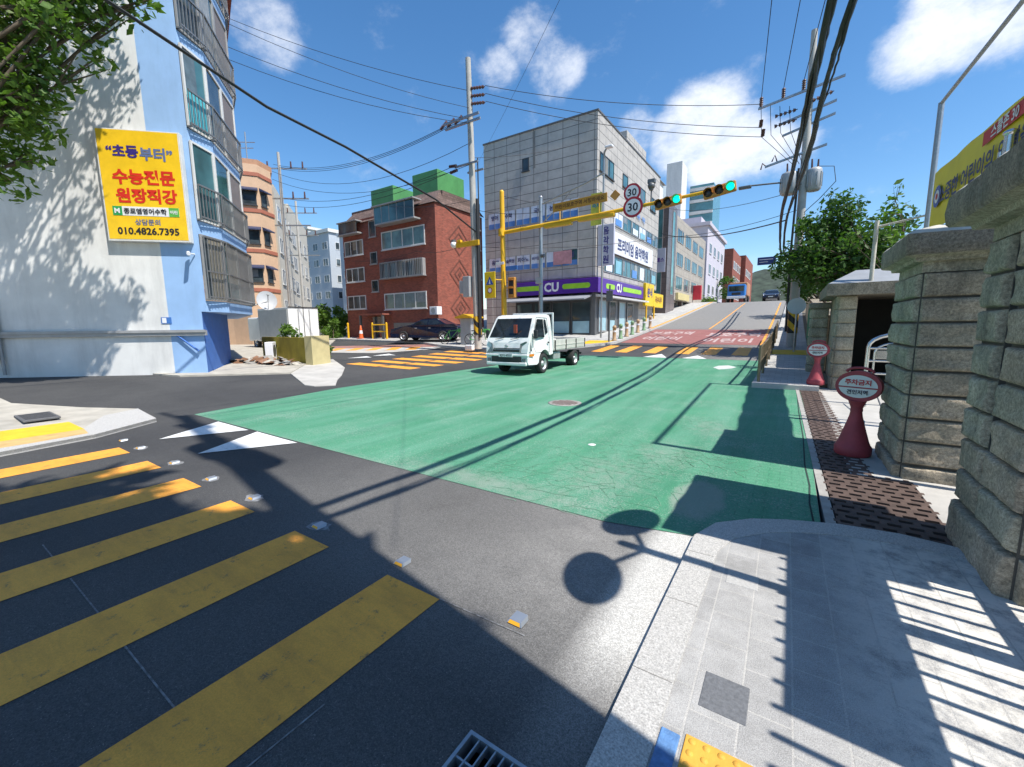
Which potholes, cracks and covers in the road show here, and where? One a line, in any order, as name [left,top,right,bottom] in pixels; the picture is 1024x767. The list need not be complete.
drain grate [442,730,527,767]
utility cover [14,411,61,423]
